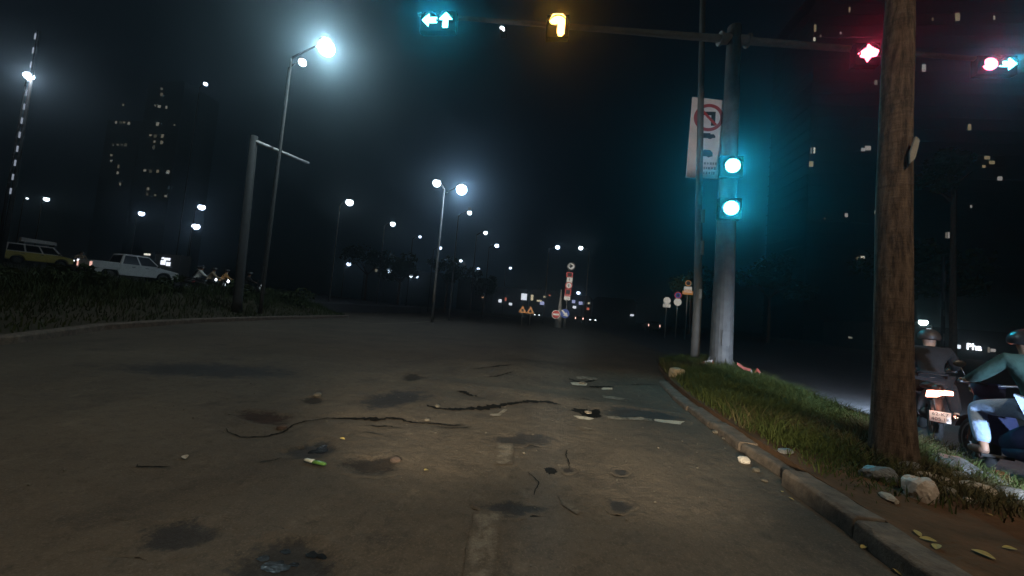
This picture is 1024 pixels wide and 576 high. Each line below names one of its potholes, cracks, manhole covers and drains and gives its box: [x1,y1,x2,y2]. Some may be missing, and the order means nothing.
pothole [602,497,640,516]
crack [226,365,561,437]
pothole [610,467,632,477]
